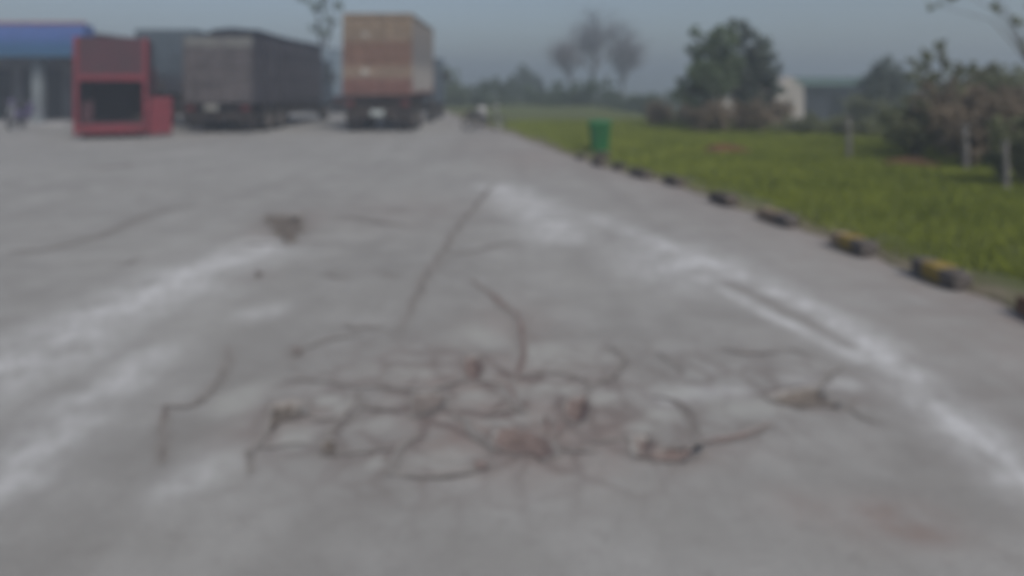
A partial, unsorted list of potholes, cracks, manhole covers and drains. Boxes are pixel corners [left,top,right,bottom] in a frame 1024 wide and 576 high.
crack [654,395,772,444]
crack [723,347,842,389]
crack [657,352,684,372]
crack [12,204,196,265]
crack [157,346,234,463]
pothole [263,211,311,246]
crack [244,435,309,473]
crack [288,185,629,478]
